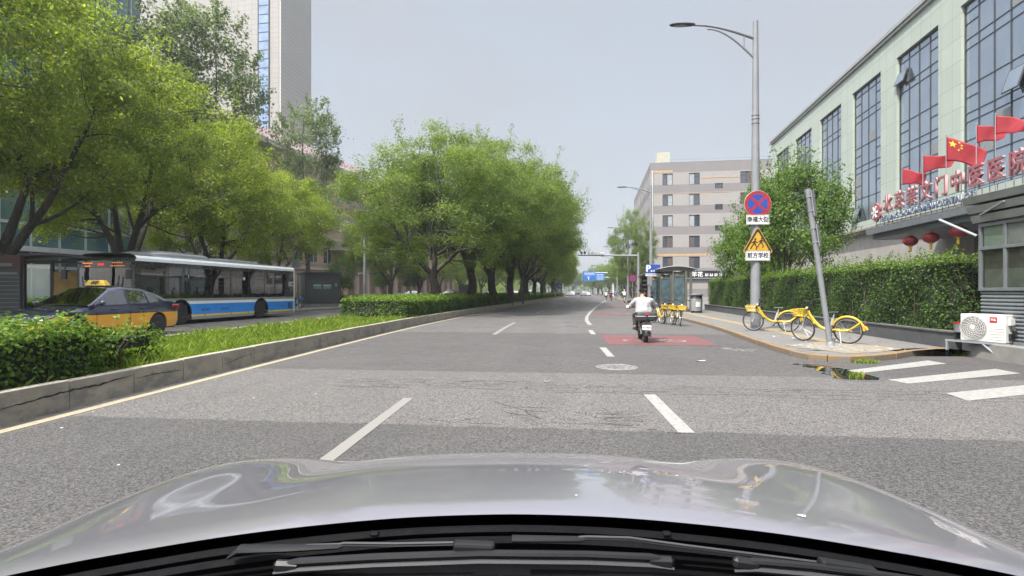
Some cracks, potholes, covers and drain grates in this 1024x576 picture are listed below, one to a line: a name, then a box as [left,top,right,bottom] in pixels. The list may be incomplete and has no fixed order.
crack [557,411,647,428]
crack [335,379,1020,419]
